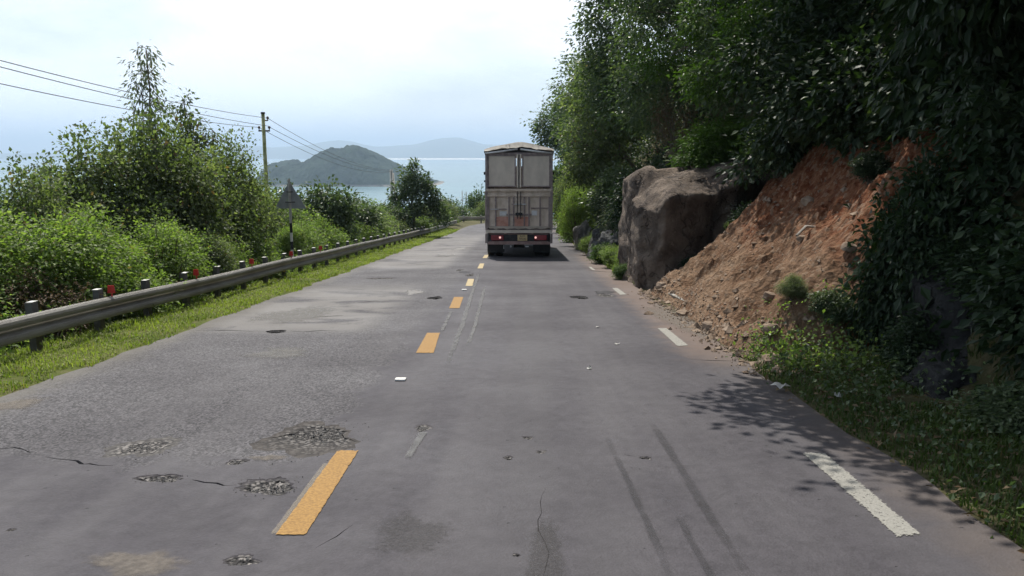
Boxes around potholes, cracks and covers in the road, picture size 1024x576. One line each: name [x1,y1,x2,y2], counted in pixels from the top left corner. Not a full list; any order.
pothole [223,554,263,566]
pothole [102,435,186,460]
pothole [133,474,183,483]
pothole [234,476,303,499]
pothole [250,420,369,464]
crack [538,494,550,574]
crack [49,457,112,466]
